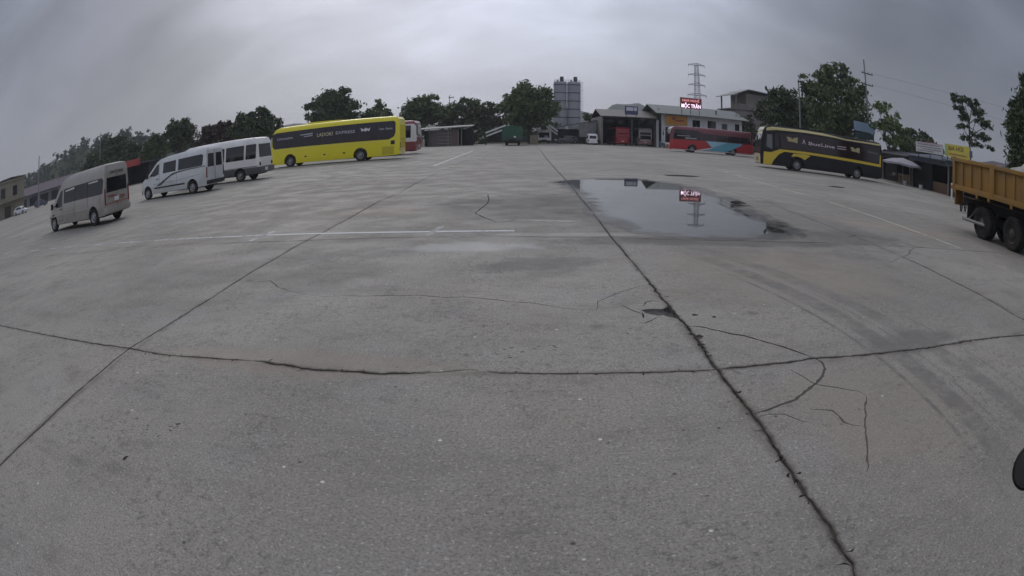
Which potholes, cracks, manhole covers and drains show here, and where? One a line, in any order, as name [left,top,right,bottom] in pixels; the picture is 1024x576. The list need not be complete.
crack [315,285,660,323]
pothole [641,306,680,319]
crack [687,326,869,472]
